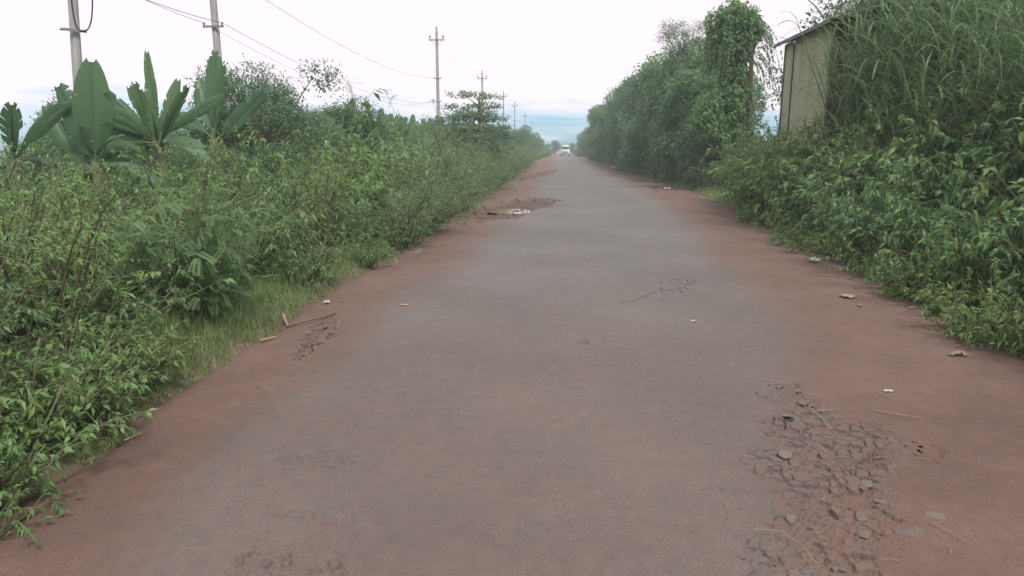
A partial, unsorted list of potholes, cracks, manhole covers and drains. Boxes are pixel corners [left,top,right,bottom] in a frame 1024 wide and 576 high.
crack [614,275,705,311]
pothole [281,313,349,365]
pothole [468,198,567,221]
